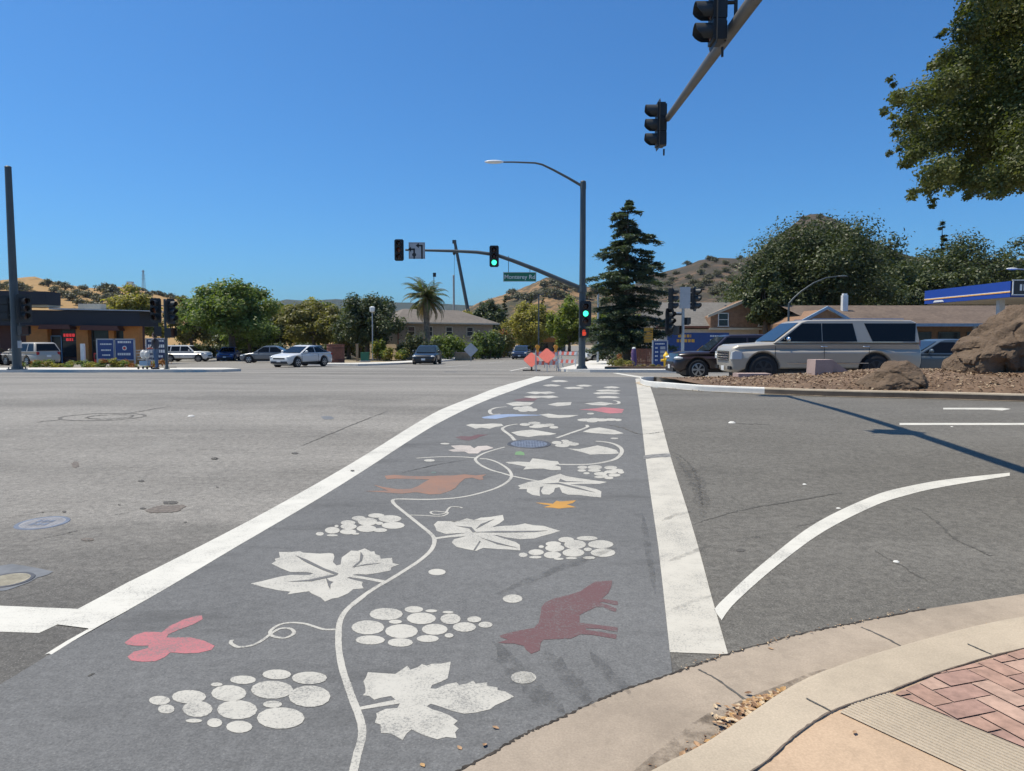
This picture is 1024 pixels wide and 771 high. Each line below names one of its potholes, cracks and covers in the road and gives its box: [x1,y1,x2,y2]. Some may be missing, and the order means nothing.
crack [918,509,992,556]
utility cover [0,572,36,588]
manhole cover [13,516,71,530]
manhole cover [507,440,551,449]
